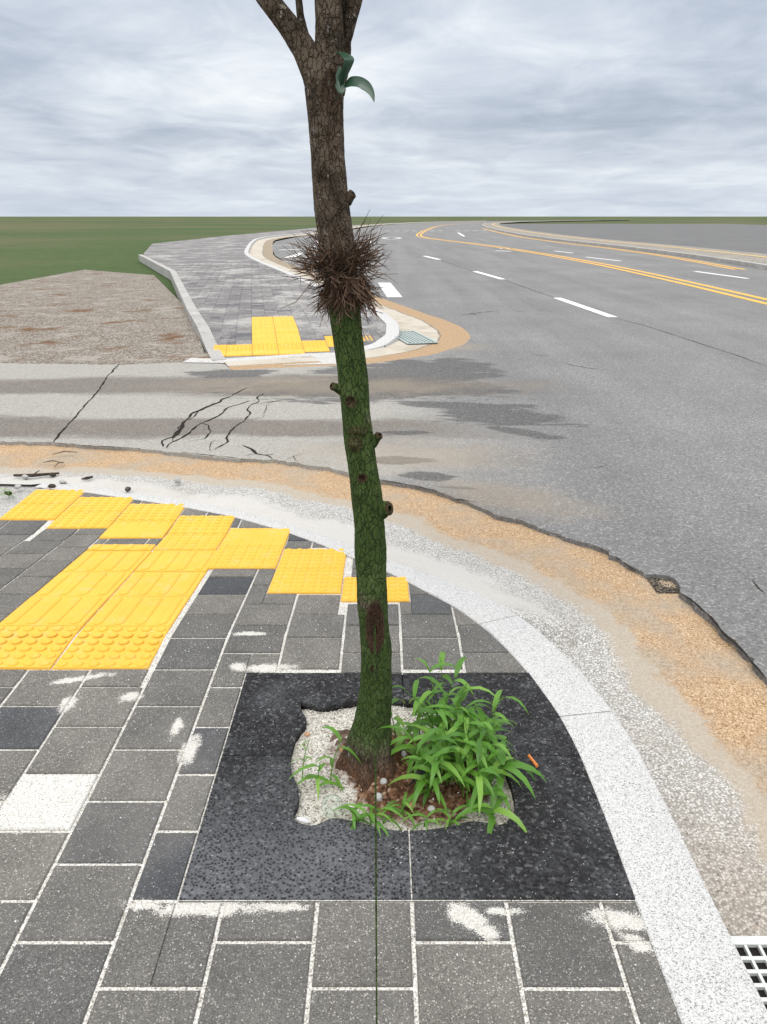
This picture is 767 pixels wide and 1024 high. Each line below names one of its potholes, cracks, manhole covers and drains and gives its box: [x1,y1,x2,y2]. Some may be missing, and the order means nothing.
pothole [647,577,680,594]
crack [161,387,285,459]
drain grate [730,936,767,1010]
drain grate [399,331,438,344]
